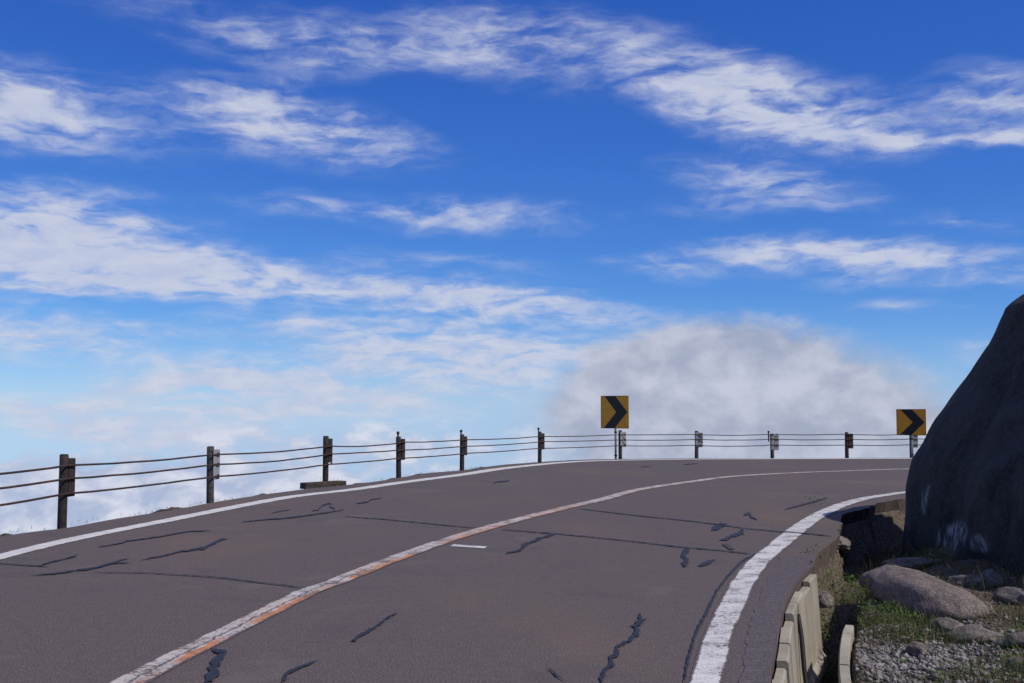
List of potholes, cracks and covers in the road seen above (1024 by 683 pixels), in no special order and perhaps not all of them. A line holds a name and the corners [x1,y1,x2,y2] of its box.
crack [282,660,317,682]
crack [242,498,476,528]
crack [503,529,757,680]
crack [2,530,303,588]
